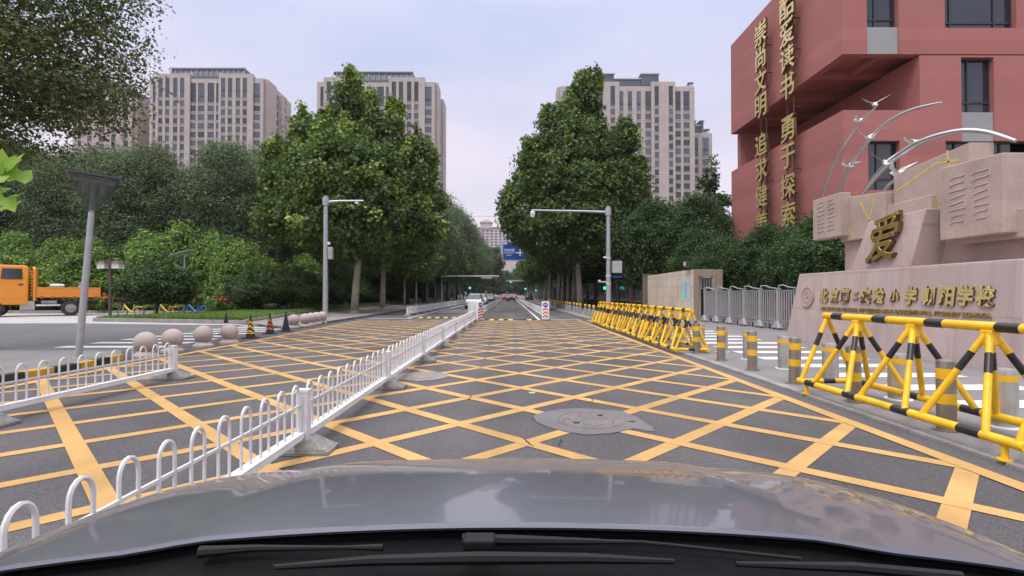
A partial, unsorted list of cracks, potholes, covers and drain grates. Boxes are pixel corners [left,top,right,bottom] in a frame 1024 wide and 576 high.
manhole cover [533,408,655,435]
